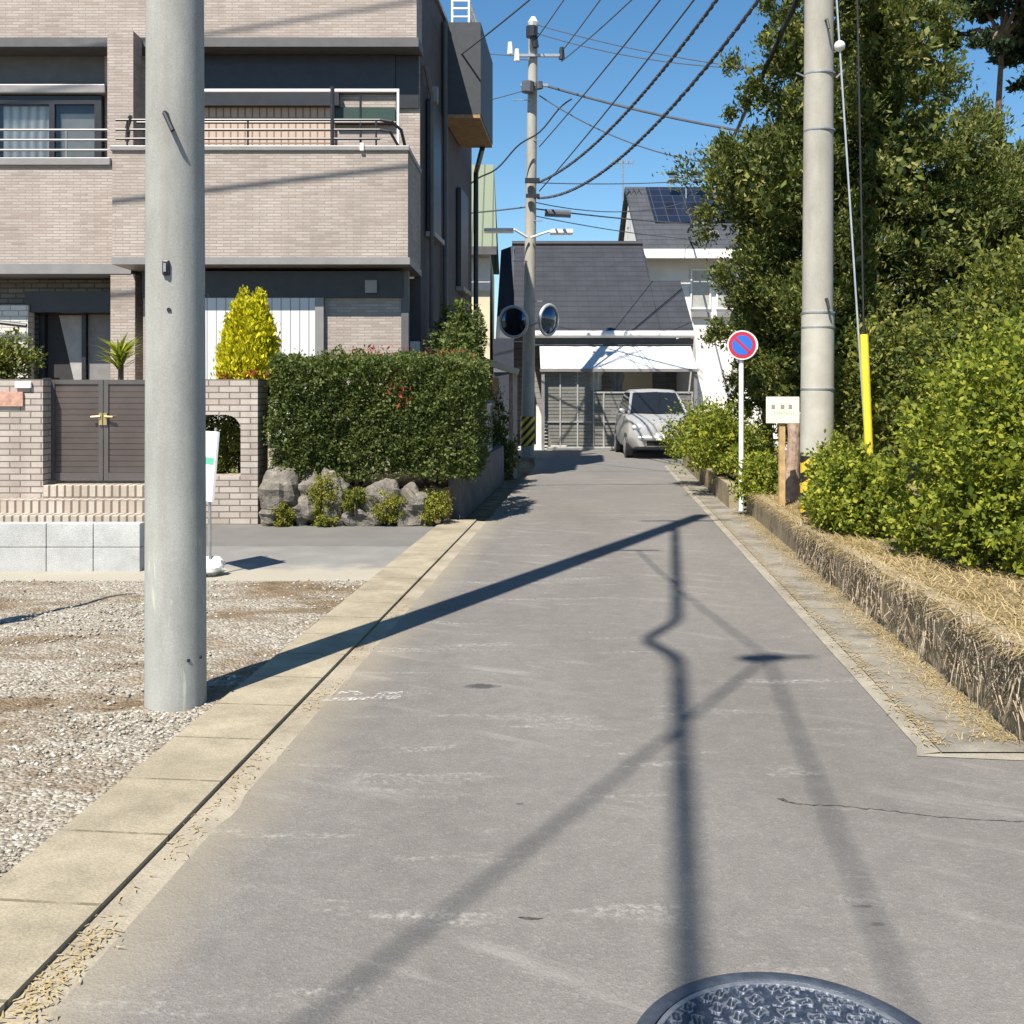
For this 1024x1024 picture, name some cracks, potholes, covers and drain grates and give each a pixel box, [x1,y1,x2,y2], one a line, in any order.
crack [777,798,1024,822]
manhole cover [637,972,921,1024]
